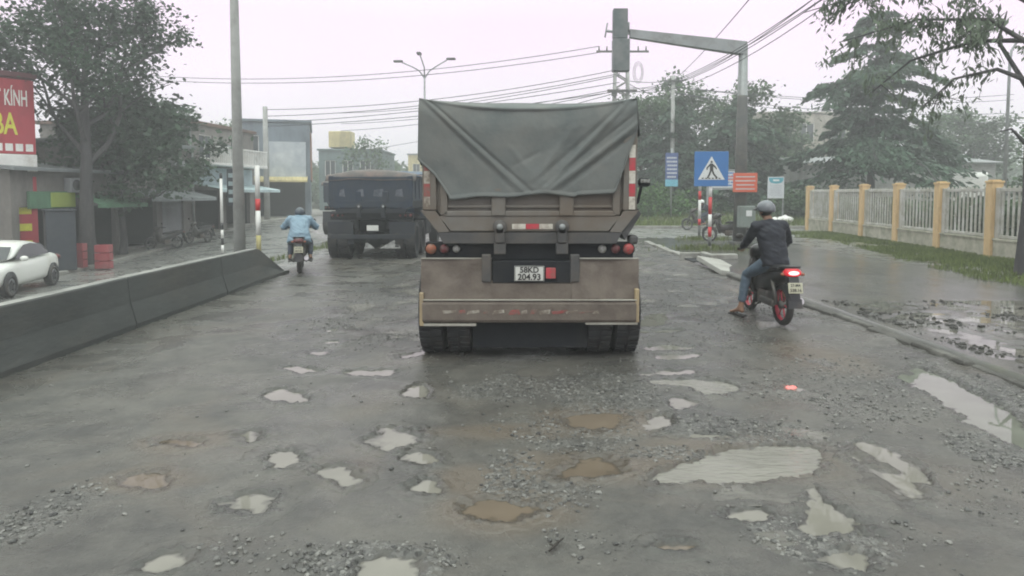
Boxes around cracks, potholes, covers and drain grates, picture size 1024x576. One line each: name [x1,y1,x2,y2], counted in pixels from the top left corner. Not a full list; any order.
pothole [625,435,853,497]
pothole [534,448,650,486]
pothole [876,362,1024,464]
pothole [237,383,328,409]
pothole [441,488,570,534]
pothole [284,458,380,496]
pothole [767,473,902,556]
pothole [544,406,651,438]
pothole [818,430,961,525]
pothole [322,540,445,576]
